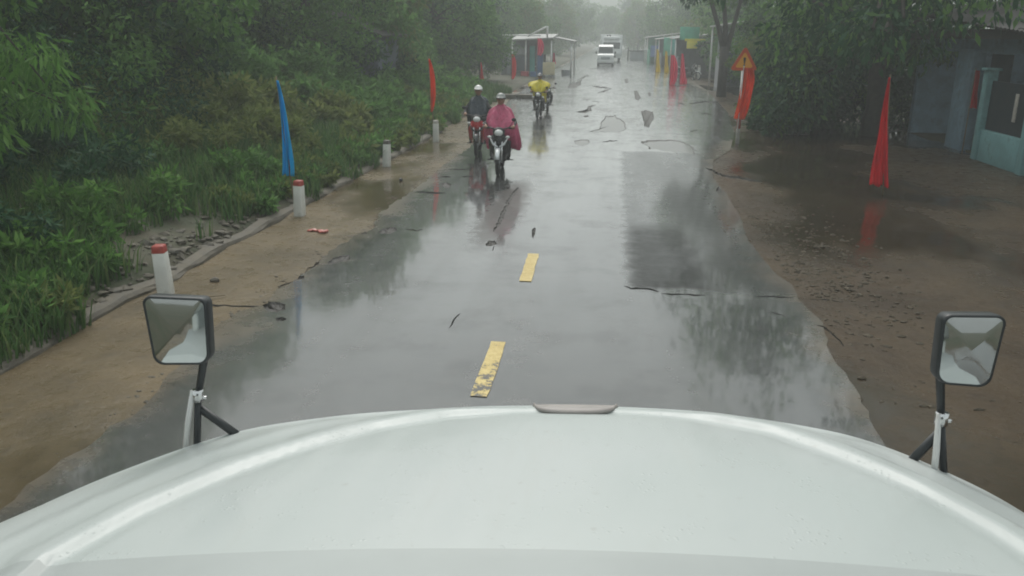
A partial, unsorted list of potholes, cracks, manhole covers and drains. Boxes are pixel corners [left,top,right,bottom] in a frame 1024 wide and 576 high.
pothole [641,110,654,127]
crack [492,188,518,251]
crack [625,286,704,296]
pothole [263,301,286,312]
crack [561,68,612,102]
pothole [591,115,626,132]
